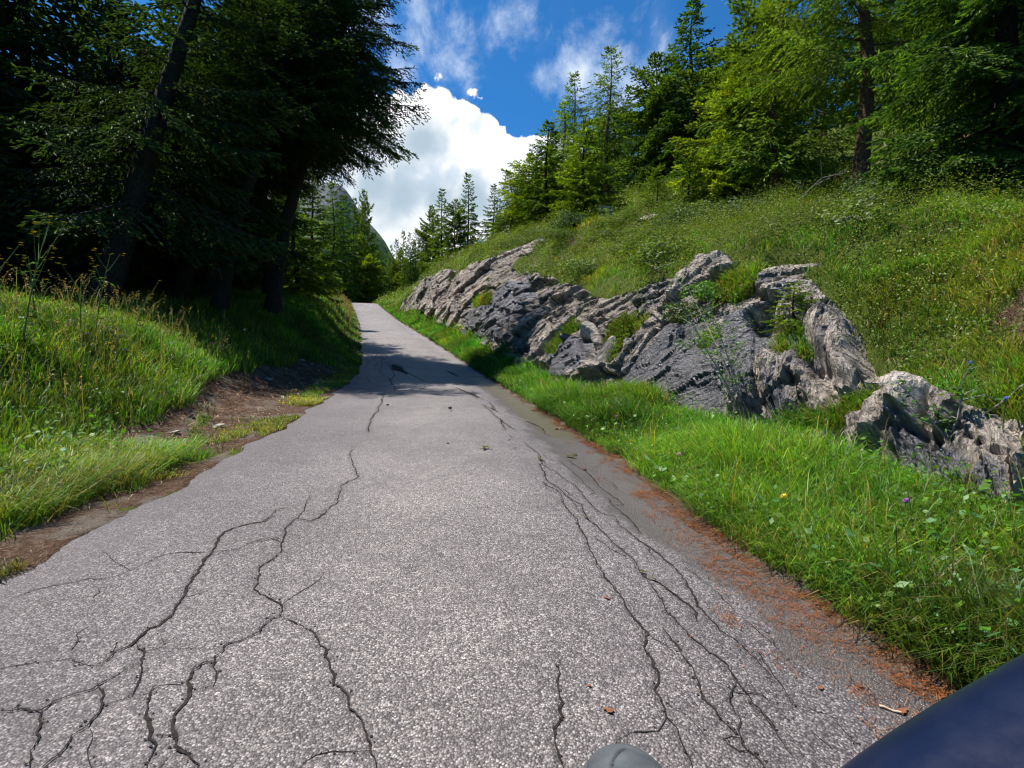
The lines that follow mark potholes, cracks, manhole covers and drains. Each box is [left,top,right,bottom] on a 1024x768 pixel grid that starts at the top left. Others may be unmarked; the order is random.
crack [529,446,860,768]
crack [466,392,550,440]
crack [357,352,426,432]
crack [0,449,382,768]
